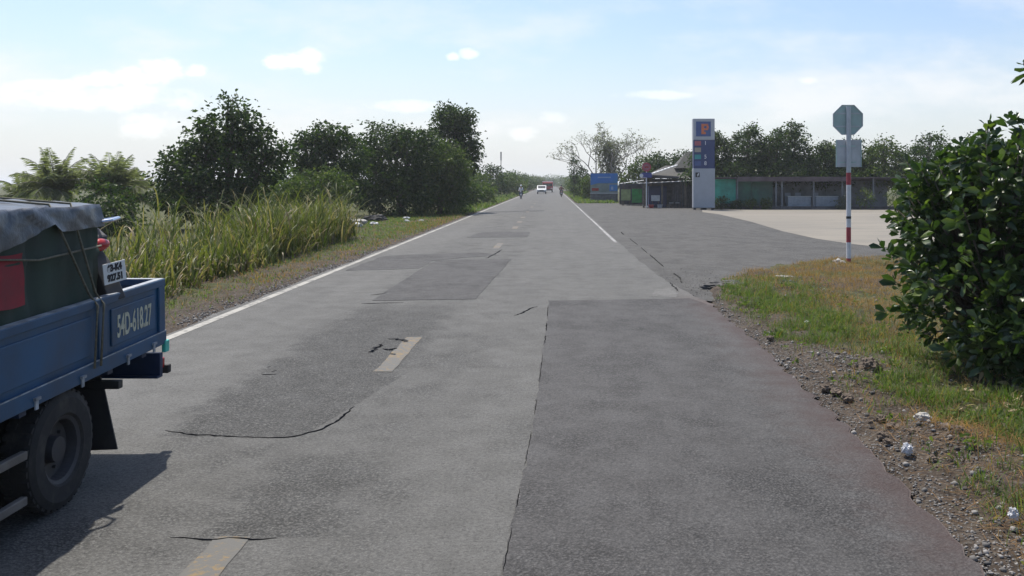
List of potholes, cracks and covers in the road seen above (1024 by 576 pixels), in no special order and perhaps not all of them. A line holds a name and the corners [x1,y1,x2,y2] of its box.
crack [621,232,682,291]
crack [165,406,355,438]
crack [368,338,408,355]
